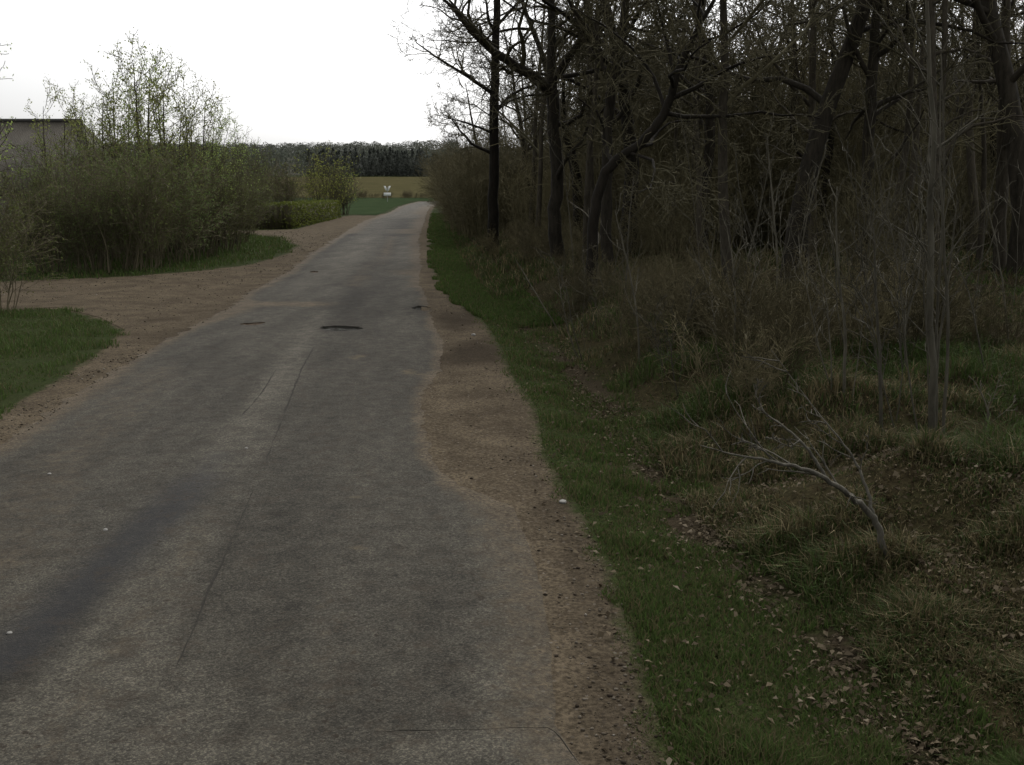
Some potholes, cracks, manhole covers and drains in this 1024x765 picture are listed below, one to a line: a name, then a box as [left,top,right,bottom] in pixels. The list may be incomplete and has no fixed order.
crack [176,491,253,667]
crack [241,347,314,458]
